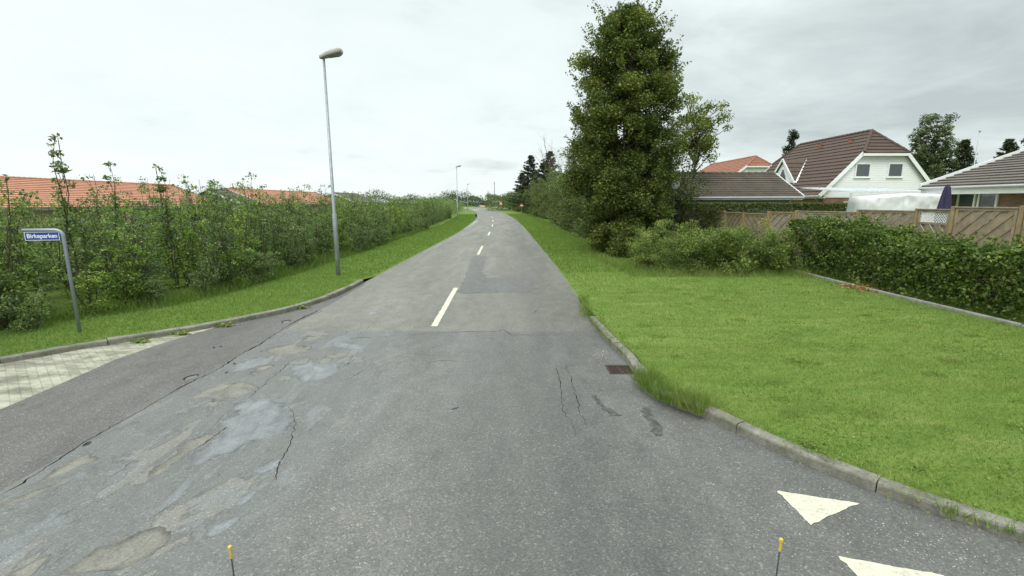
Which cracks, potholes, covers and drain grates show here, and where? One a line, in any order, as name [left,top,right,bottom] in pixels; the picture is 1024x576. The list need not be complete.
crack [556,365,589,433]
drain grate [605,365,634,374]
crack [275,409,296,482]
